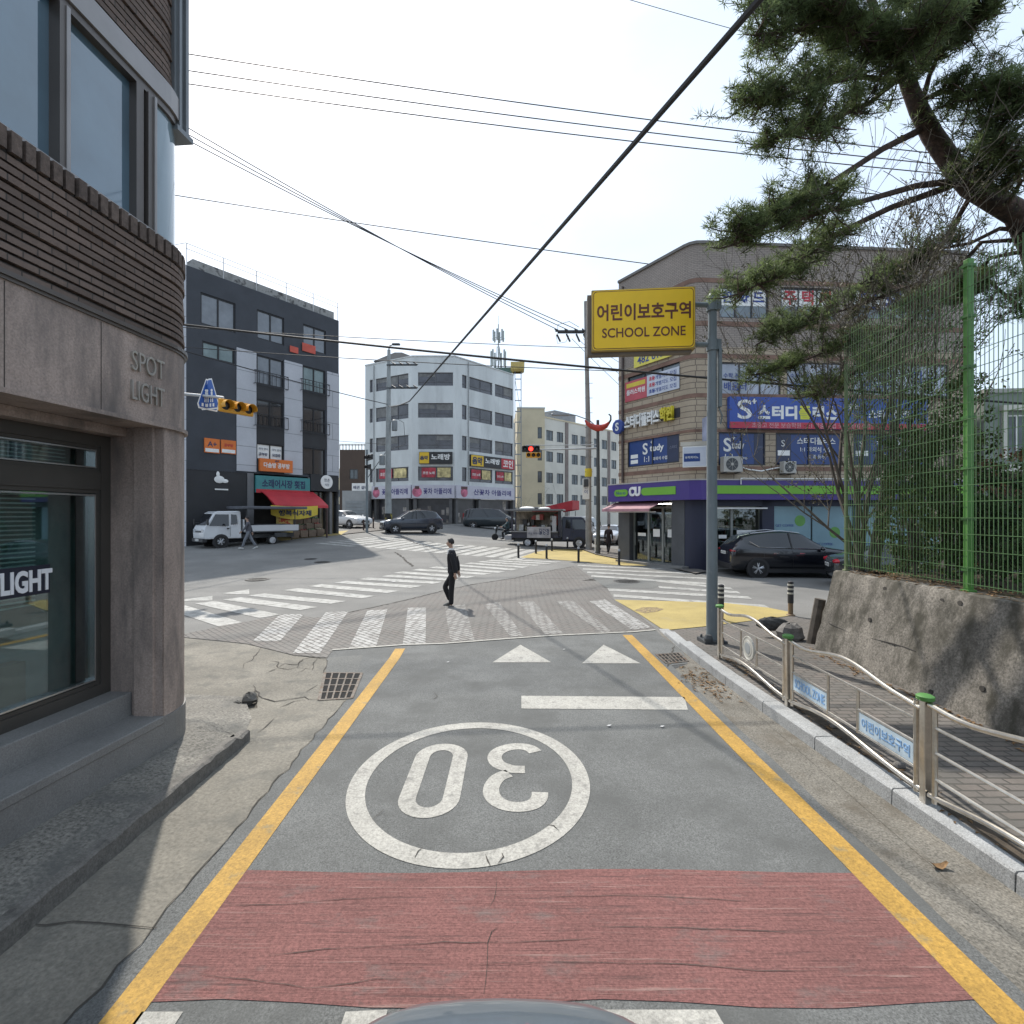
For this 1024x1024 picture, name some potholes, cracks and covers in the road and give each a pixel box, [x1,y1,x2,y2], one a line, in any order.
drain grate [317,672,363,701]
crack [269,926,806,991]
crack [250,896,394,905]
drain grate [655,652,689,664]
crack [243,648,328,732]
